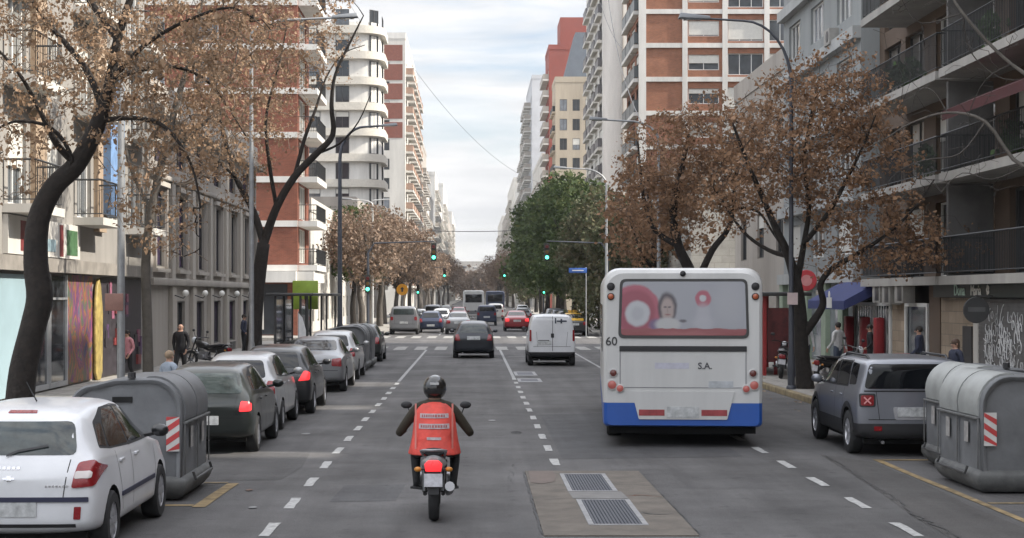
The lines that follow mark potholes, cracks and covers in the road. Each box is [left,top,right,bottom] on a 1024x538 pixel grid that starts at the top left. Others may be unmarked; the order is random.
drain grate [576,499,649,525]
drain grate [560,473,618,491]
